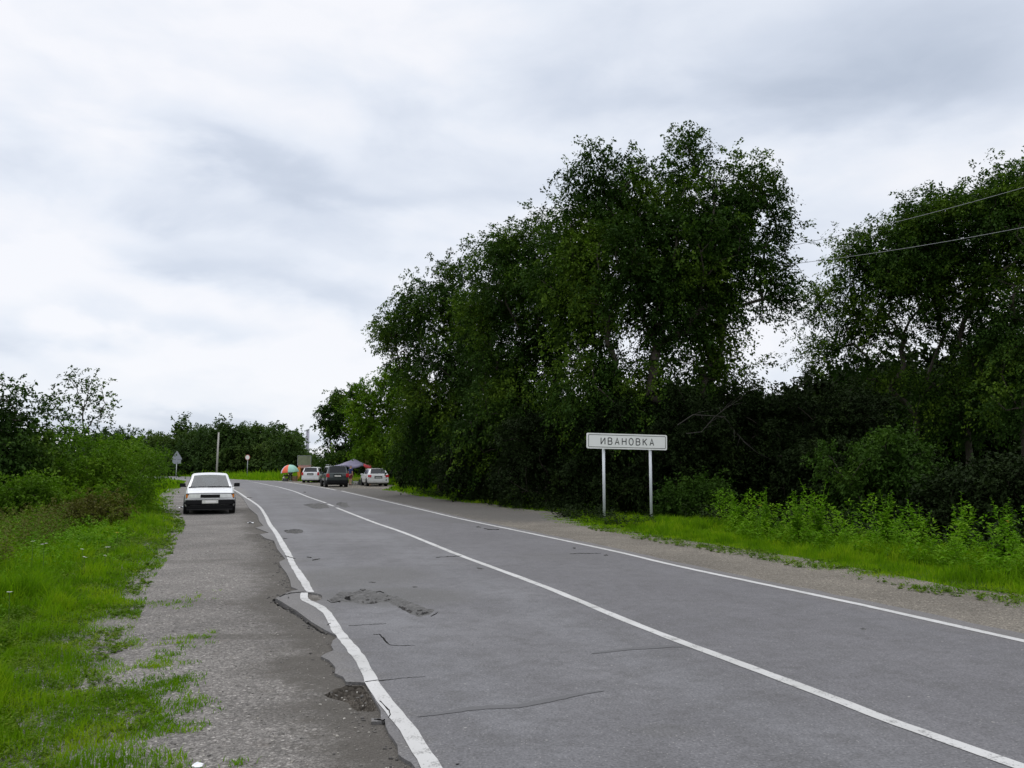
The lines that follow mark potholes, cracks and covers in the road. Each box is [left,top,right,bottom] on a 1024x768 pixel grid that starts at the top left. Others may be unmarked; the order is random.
pothole [325,686,377,712]
pothole [329,589,434,617]
crack [349,623,415,646]
